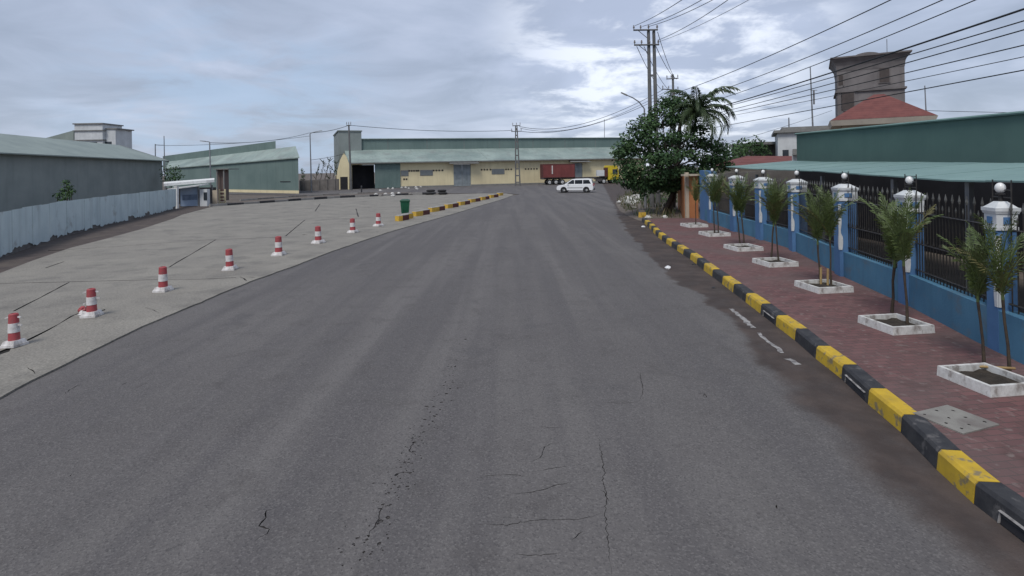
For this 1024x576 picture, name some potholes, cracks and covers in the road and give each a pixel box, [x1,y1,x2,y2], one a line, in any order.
manhole cover [913,405,1000,435]
crack [502,439,612,574]
